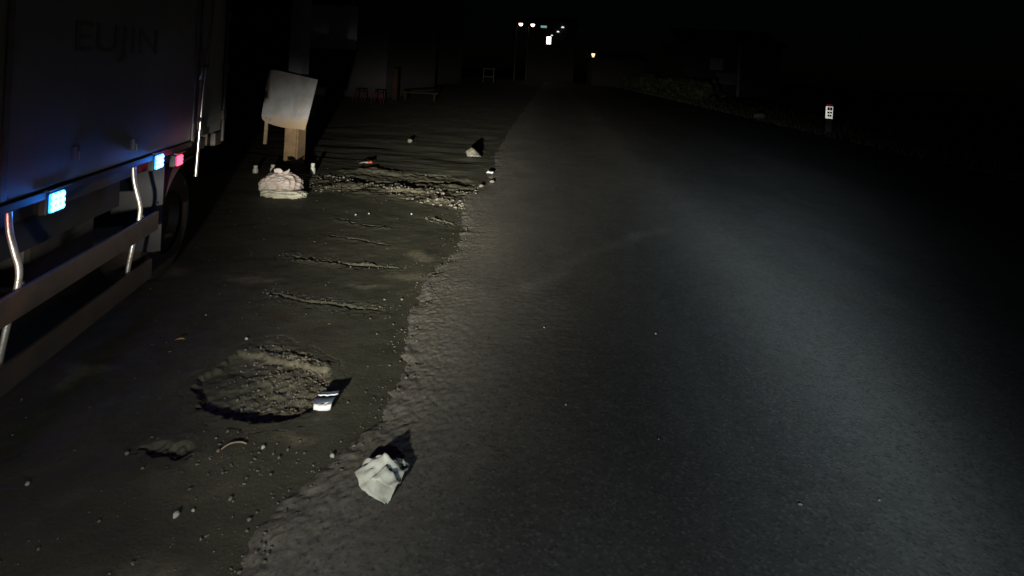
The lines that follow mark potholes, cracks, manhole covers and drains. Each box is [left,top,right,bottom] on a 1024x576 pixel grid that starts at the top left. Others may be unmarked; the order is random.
pothole [178,336,350,434]
pothole [128,430,207,472]
pothole [283,159,492,211]
crack [258,216,409,317]
